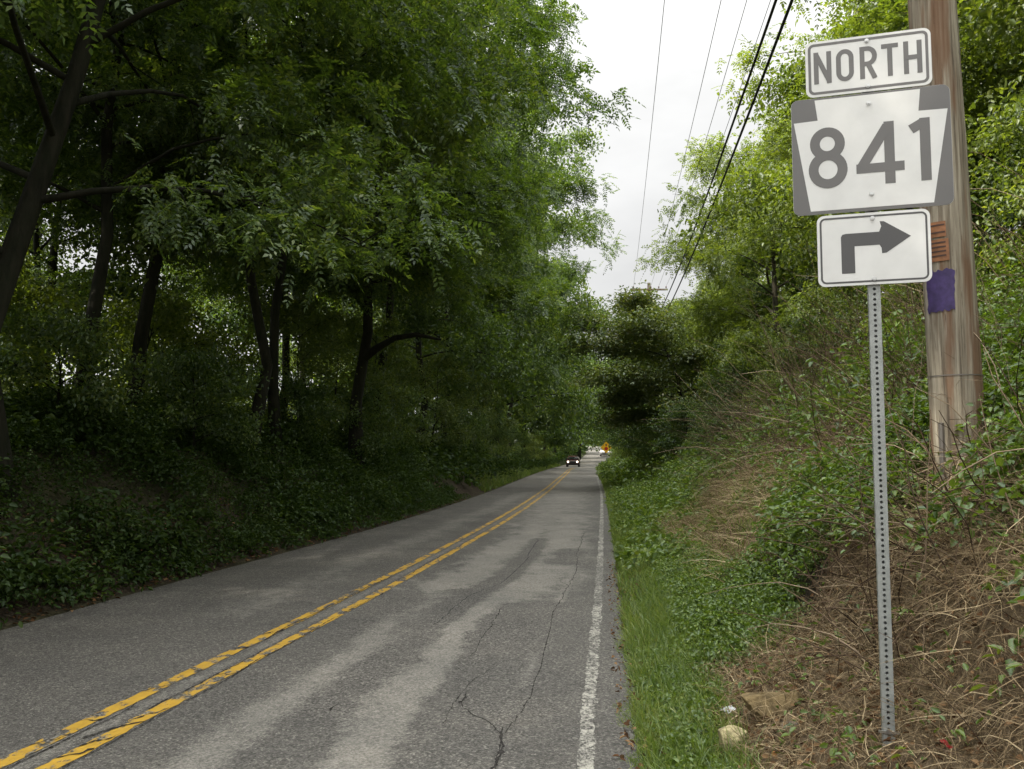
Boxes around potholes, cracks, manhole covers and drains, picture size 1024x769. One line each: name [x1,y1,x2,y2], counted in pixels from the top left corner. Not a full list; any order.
crack [444,533,585,769]
